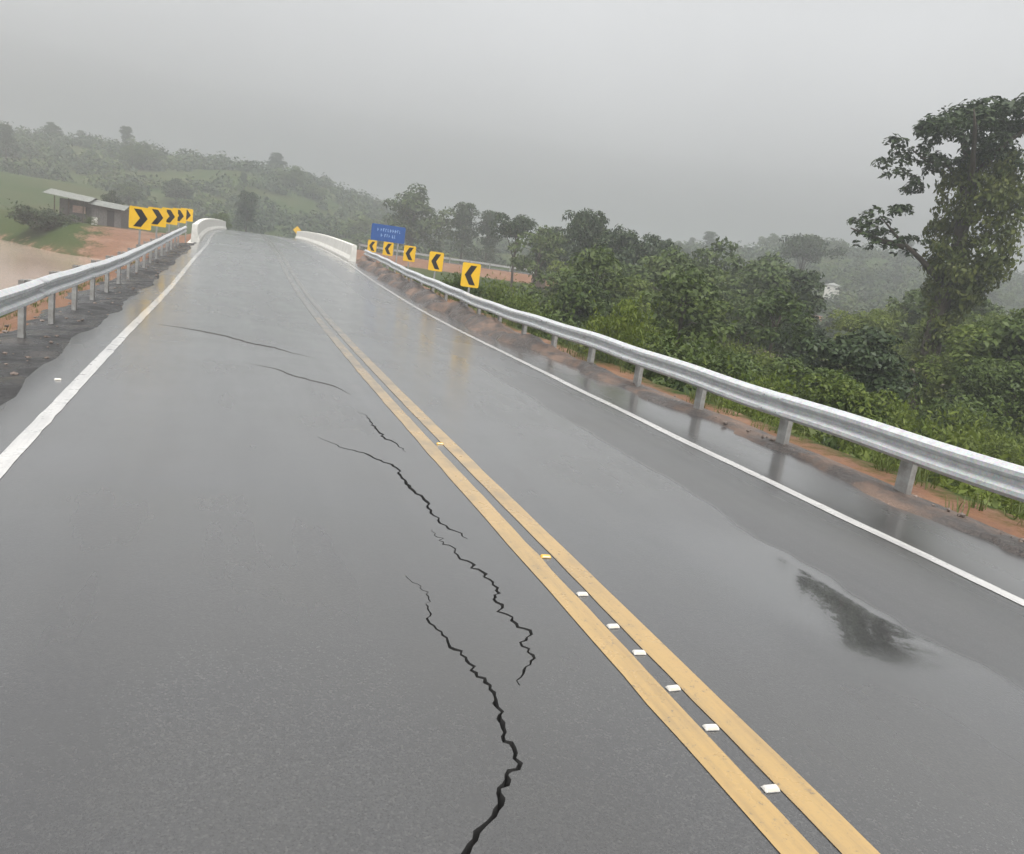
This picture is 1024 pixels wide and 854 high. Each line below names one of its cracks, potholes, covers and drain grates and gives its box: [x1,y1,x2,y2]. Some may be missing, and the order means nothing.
crack [151,323,351,395]
crack [323,412,536,854]
